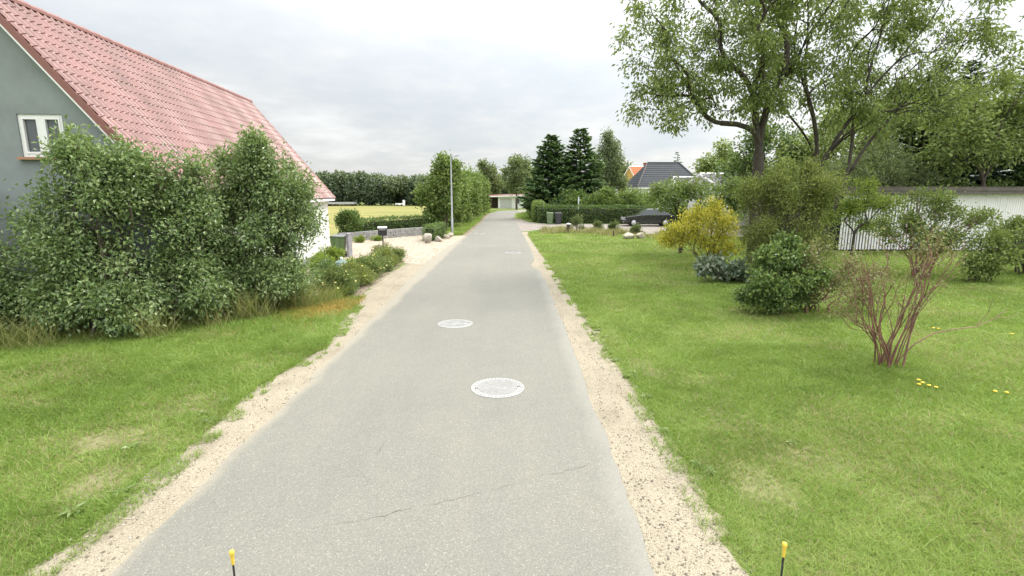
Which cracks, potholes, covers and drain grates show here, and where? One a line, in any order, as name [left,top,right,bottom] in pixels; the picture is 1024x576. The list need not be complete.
manhole cover [471,378,524,398]
manhole cover [438,319,473,328]
